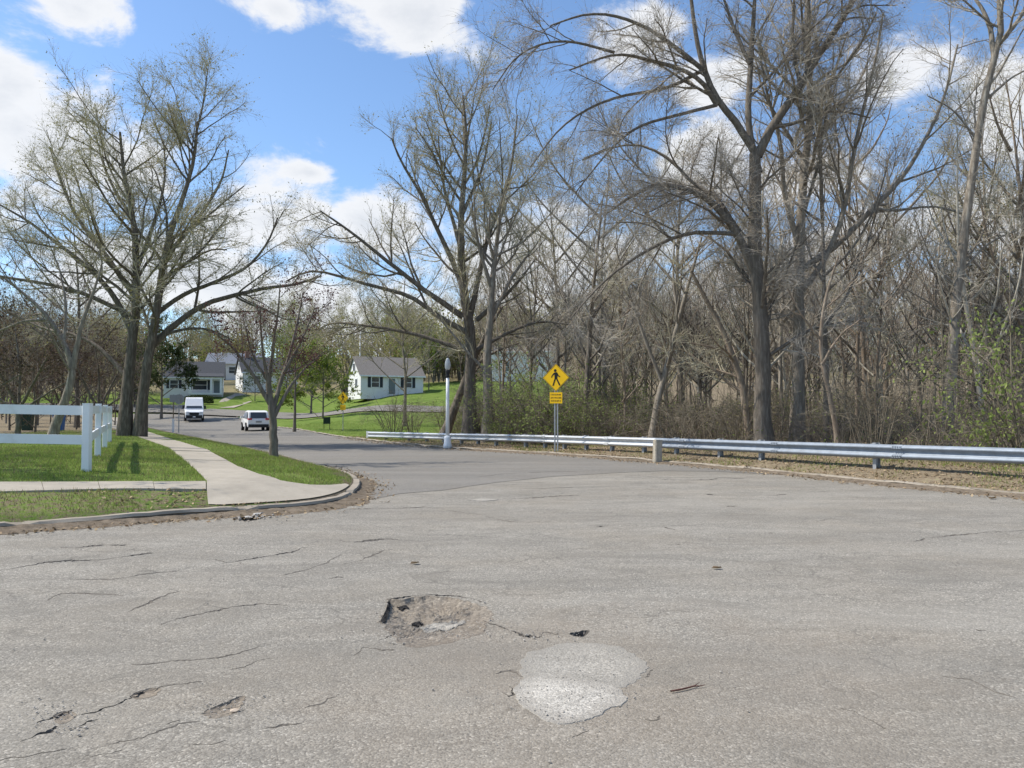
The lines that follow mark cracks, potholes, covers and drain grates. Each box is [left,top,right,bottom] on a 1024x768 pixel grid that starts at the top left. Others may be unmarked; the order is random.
pothole [202,696,246,719]
crack [85,720,225,756]
pothole [53,711,77,724]
crack [483,620,559,638]
crack [6,544,281,624]
crack [132,645,269,669]
crack [264,695,337,729]
crack [2,681,202,760]
crack [906,530,1020,542]
pothole [377,595,495,648]
crack [213,539,427,579]
pothole [131,688,161,699]
